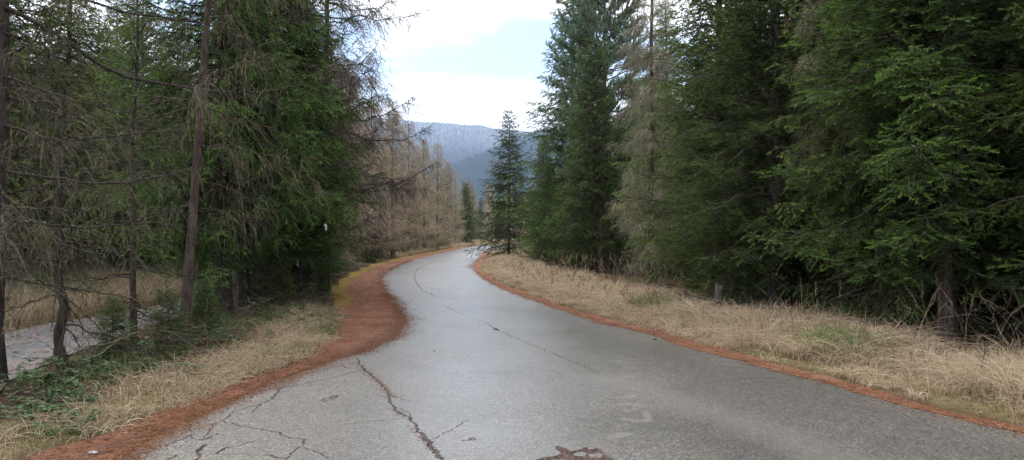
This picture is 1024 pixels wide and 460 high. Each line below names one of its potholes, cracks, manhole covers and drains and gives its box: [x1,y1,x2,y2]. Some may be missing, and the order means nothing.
crack [124,358,469,460]
pothole [536,446,613,460]
